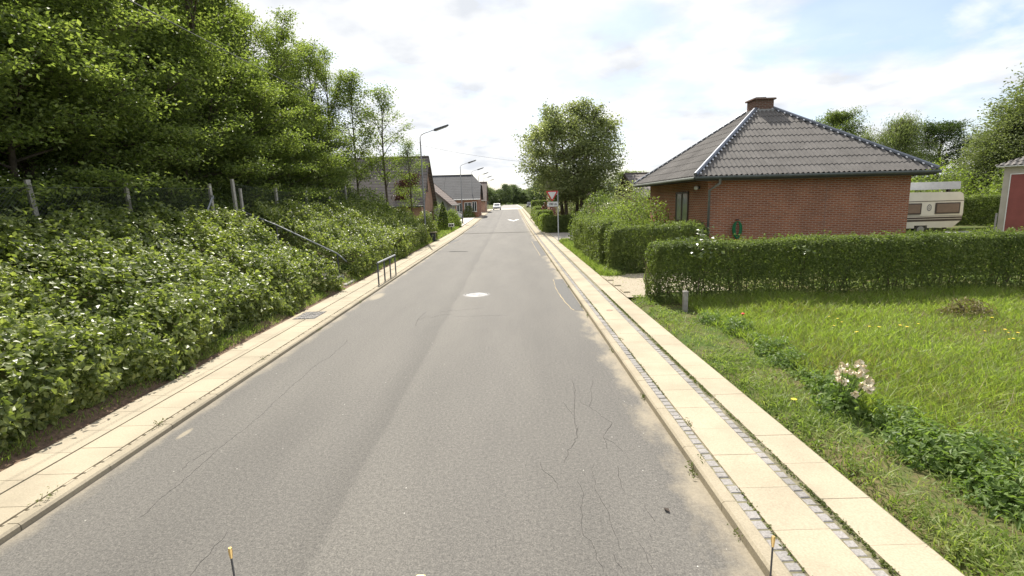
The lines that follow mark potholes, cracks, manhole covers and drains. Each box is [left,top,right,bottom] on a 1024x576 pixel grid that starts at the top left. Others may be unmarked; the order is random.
crack [561,381,618,459]
crack [540,463,623,571]
